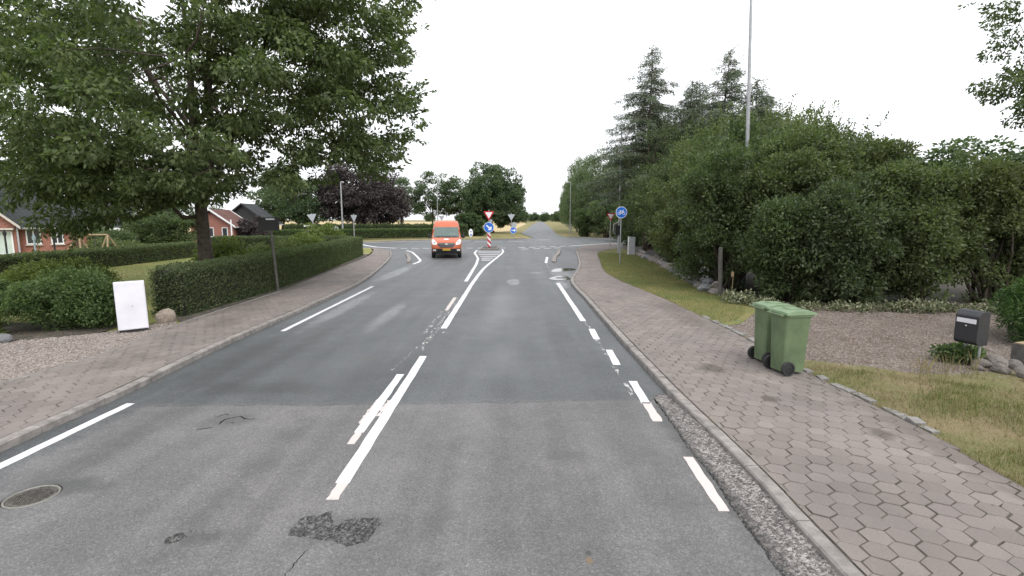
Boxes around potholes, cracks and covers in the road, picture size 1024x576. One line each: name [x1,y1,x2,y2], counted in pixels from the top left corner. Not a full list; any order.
crack [197,414,257,430]
manhole cover [1,485,62,509]
